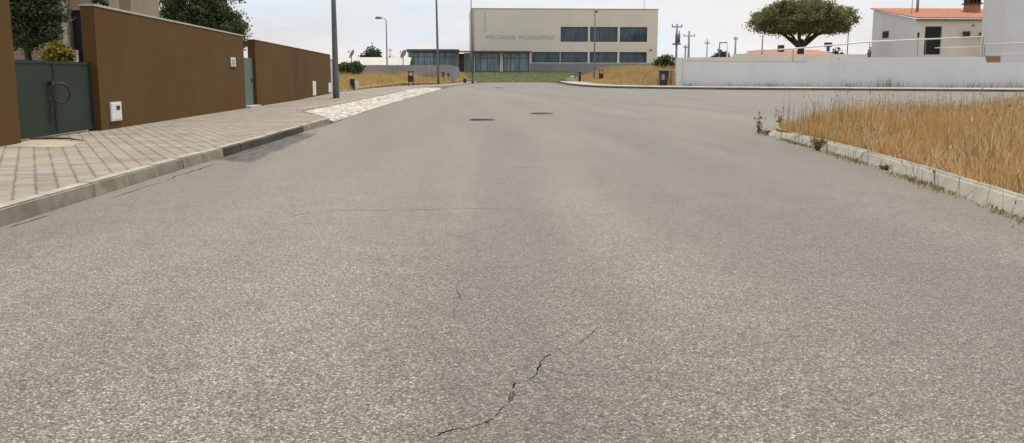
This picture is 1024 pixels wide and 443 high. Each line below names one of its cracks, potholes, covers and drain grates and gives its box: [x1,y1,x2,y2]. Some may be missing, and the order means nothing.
crack [432,329,621,438]
